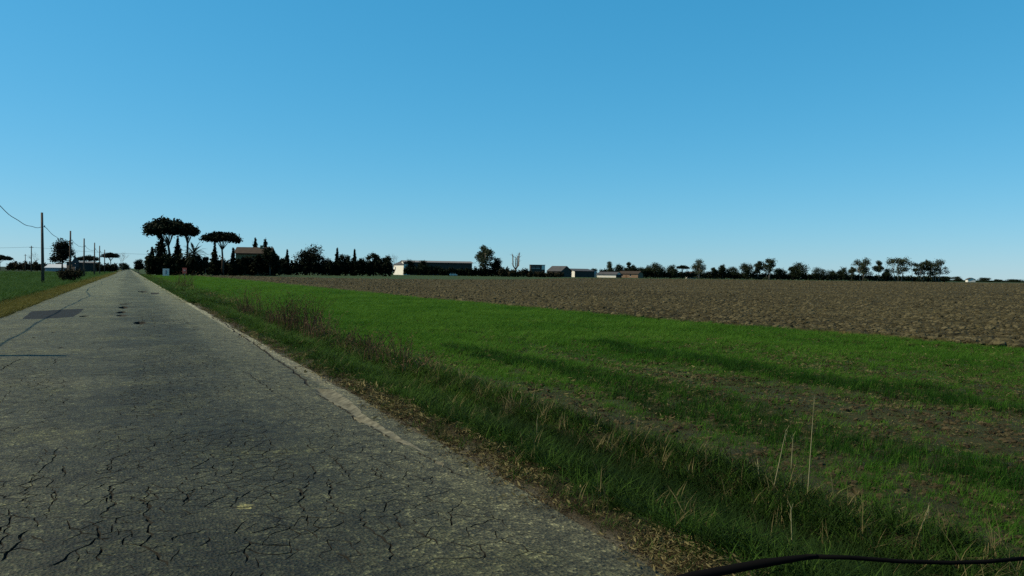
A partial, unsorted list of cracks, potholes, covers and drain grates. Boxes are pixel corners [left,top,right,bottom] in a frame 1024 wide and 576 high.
crack [0,318,560,576]
